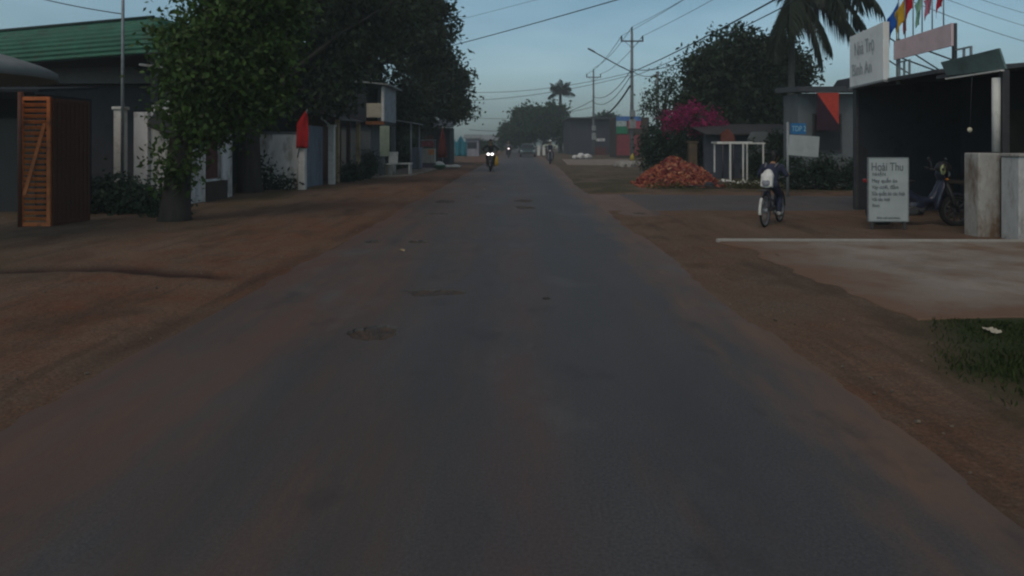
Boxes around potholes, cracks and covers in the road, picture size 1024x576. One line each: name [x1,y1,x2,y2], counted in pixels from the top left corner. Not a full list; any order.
pothole [346,325,400,341]
pothole [402,289,468,297]
